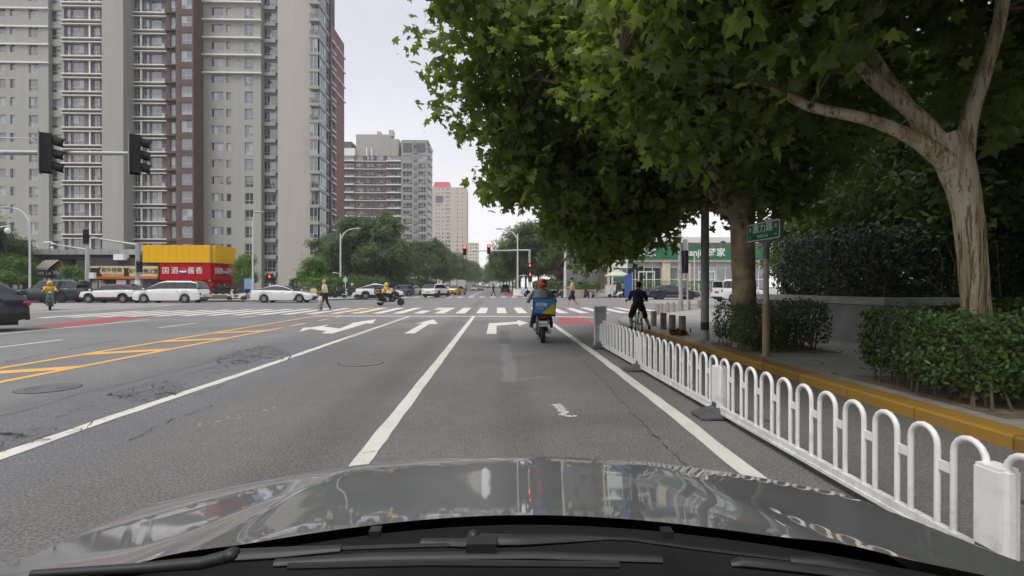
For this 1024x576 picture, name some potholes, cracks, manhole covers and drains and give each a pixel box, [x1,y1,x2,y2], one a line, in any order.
crack [0,346,303,451]
manhole cover [13,383,83,394]
